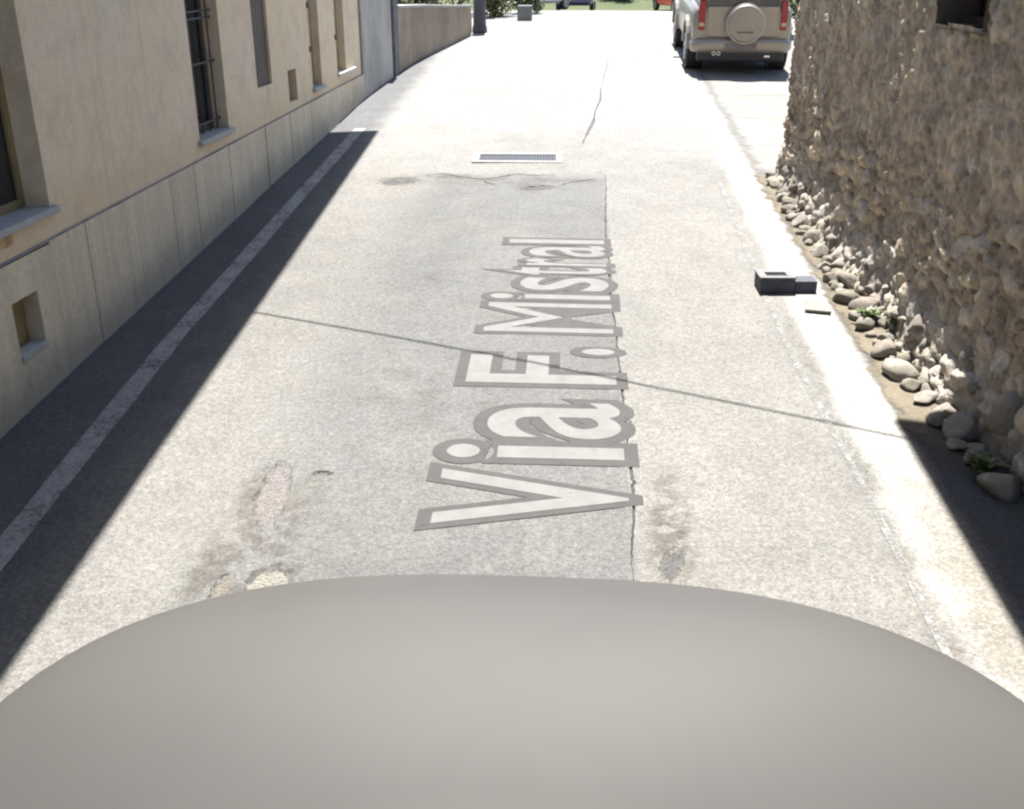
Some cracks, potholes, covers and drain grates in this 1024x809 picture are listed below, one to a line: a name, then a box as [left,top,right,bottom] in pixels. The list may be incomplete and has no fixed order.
crack [427,171,598,186]
pothole [242,452,301,539]
crack [576,58,613,147]
pothole [226,556,306,595]
drain grate [471,152,563,163]
pothole [194,564,246,603]
